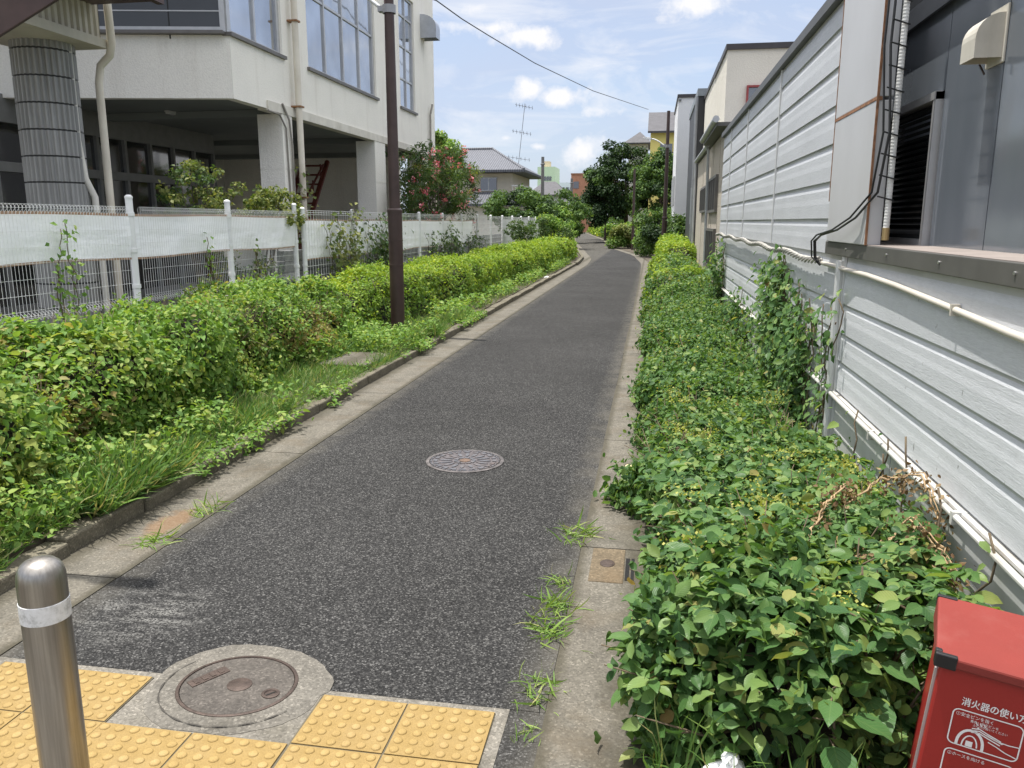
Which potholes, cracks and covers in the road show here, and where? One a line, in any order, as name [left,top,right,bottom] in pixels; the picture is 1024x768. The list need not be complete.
manhole cover [143,644,334,736]
manhole cover [426,450,504,473]
